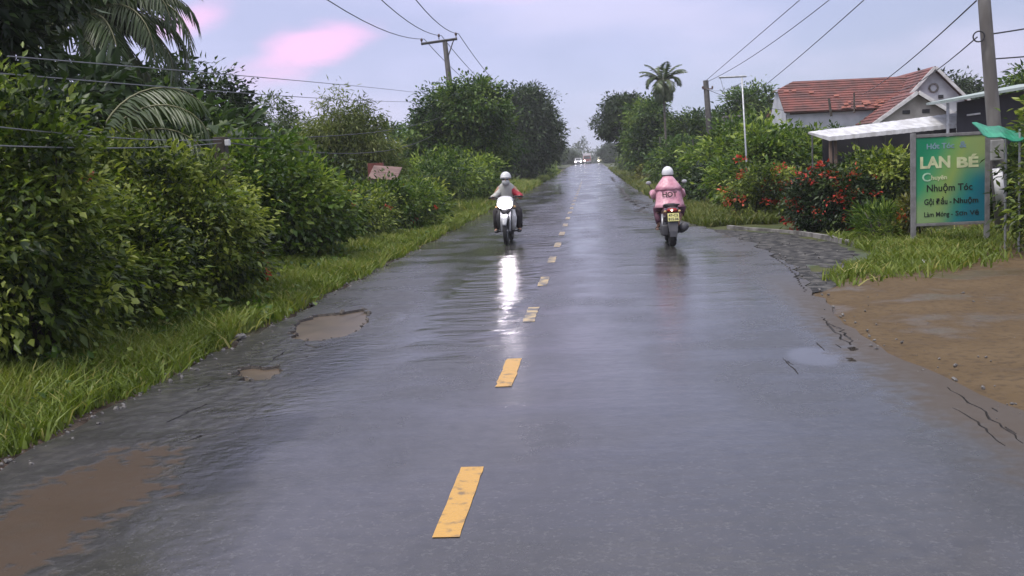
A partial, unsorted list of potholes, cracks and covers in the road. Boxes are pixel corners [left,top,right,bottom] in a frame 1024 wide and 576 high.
pothole [228,364,283,381]
crack [167,385,217,443]
crack [948,387,1023,446]
crack [817,317,853,351]
pothole [287,307,372,345]
